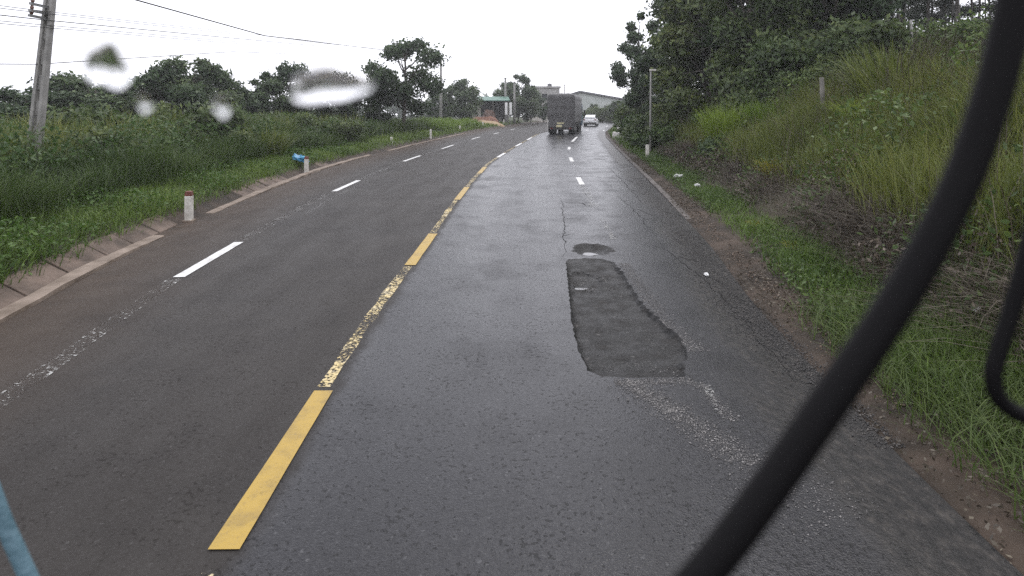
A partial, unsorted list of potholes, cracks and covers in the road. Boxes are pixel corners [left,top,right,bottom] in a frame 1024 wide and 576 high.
pothole [571,243,616,256]
